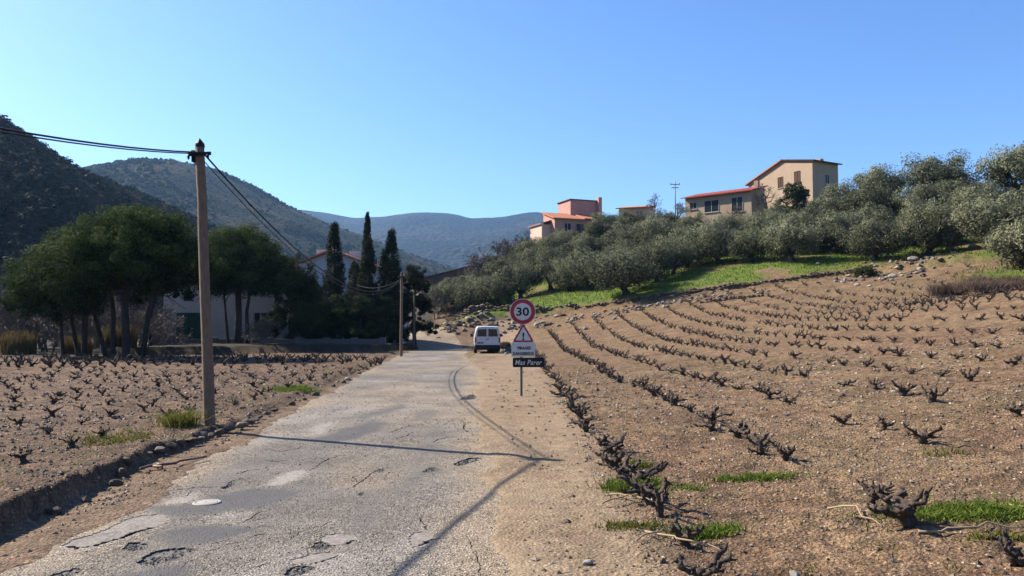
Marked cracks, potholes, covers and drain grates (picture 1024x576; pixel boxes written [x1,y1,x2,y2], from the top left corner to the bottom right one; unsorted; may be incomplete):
pothole [136,547,197,566]
pothole [284,566,315,576]
pothole [453,458,481,466]
pothole [122,542,147,552]
